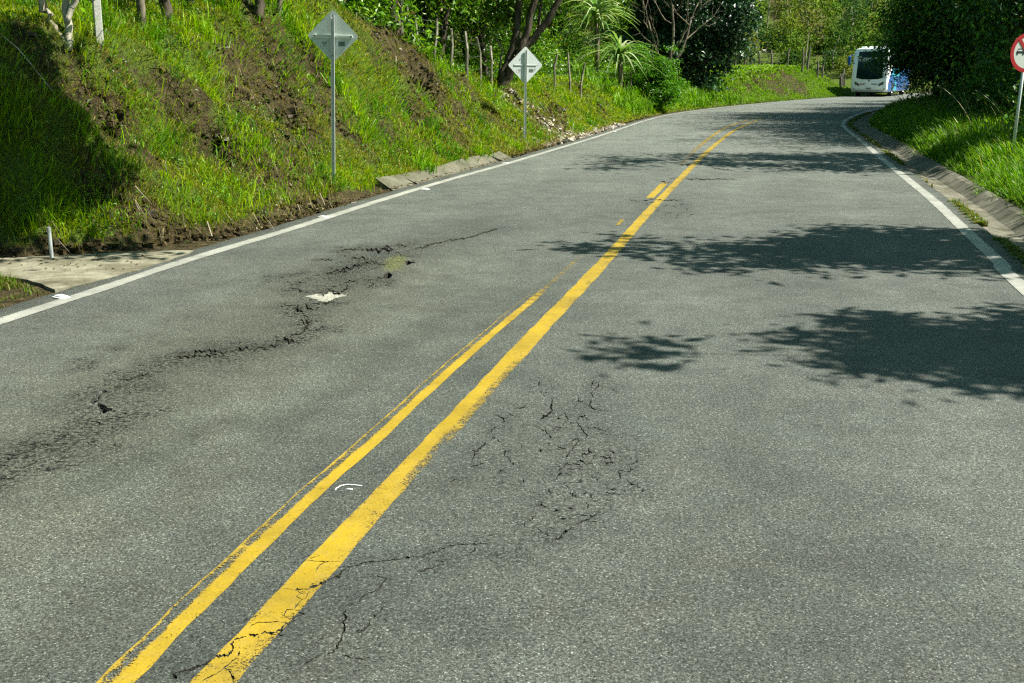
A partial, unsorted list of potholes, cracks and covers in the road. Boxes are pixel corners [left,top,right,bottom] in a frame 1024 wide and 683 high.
crack [450,381,645,562]
crack [172,533,497,683]
crack [0,229,497,485]
pothole [90,389,115,415]
